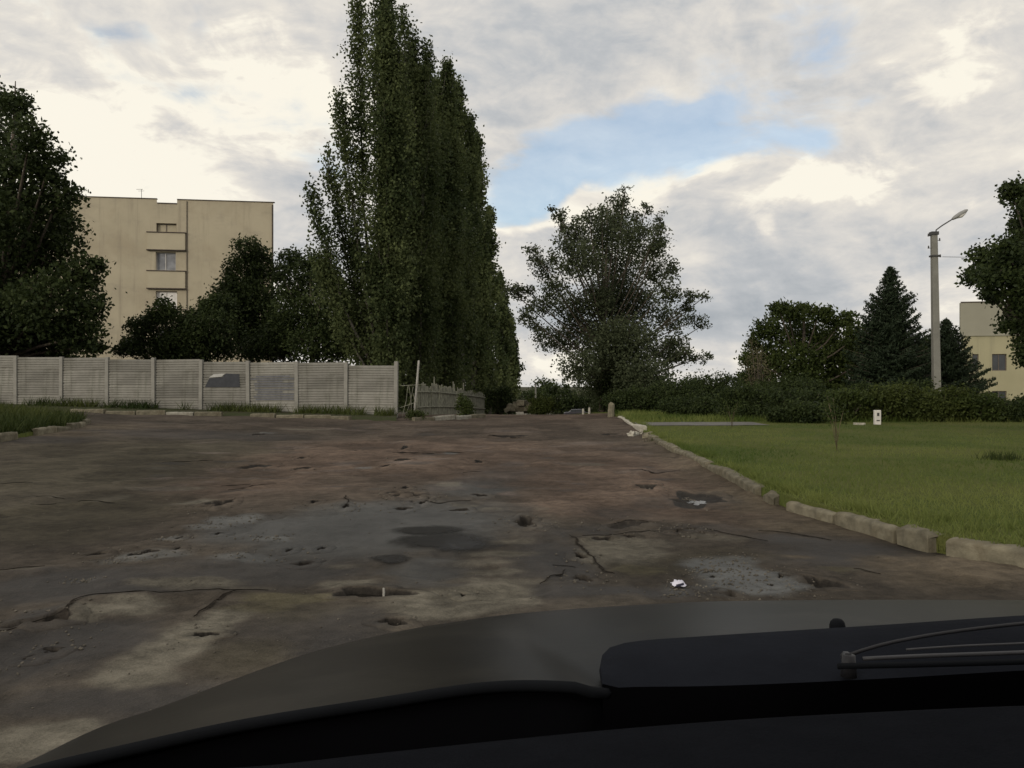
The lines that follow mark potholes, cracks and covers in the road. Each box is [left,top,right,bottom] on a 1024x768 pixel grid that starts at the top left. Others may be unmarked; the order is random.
pothole [194,497,244,512]
pothole [313,583,440,602]
pothole [504,513,544,531]
crack [0,588,266,631]
pothole [657,488,740,513]
crack [706,528,830,541]
pothole [596,517,672,533]
crack [541,520,655,583]
pothole [361,613,423,632]
